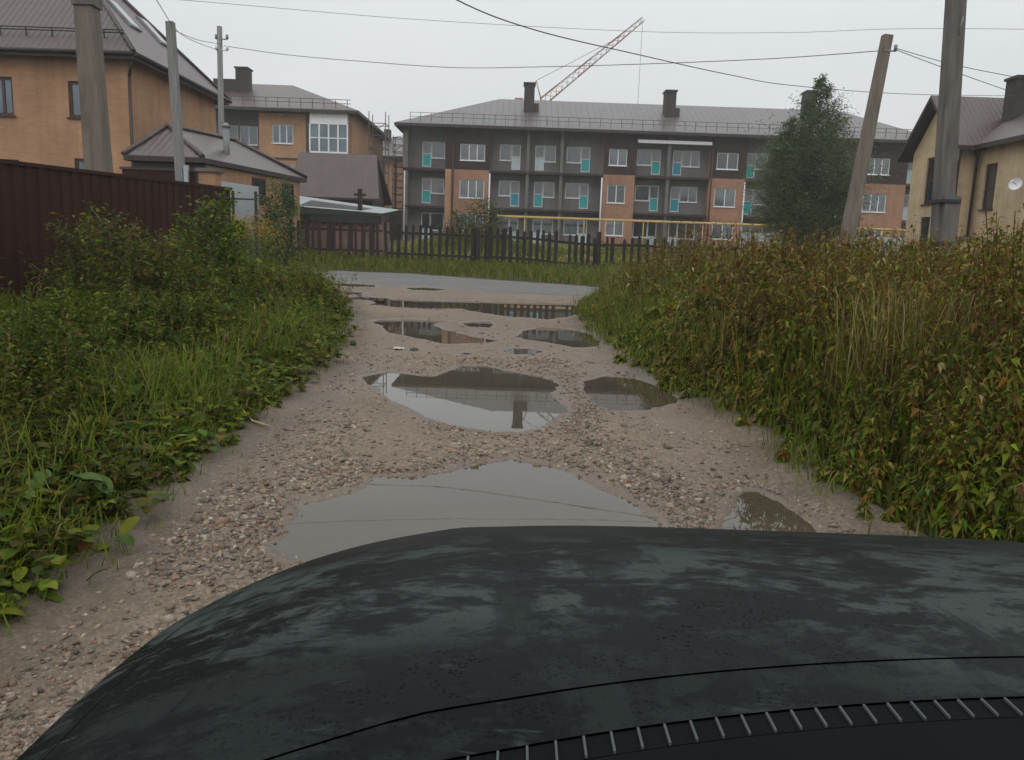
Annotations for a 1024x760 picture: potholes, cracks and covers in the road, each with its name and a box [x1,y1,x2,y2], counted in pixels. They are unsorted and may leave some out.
pothole [511,327,600,348]
pothole [706,487,829,533]
pothole [366,298,576,320]
pothole [369,318,503,344]
pothole [576,374,679,412]
pothole [257,455,671,567]
pothole [357,363,575,435]
pothole [497,346,549,355]
